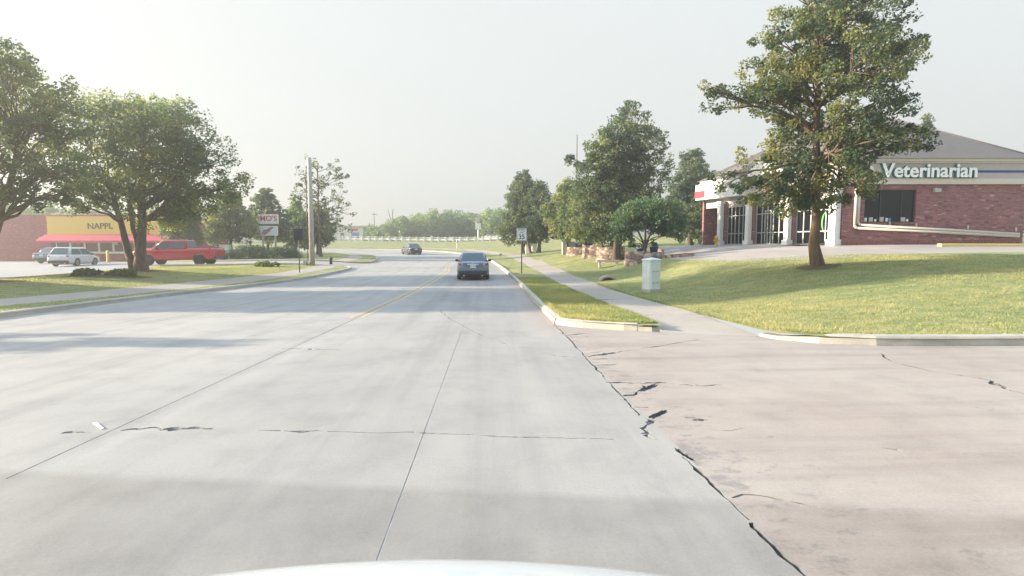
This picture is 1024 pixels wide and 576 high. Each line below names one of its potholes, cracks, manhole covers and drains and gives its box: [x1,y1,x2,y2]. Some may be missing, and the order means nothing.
crack [880,353,1024,394]
crack [440,311,842,576]
crack [61,427,614,440]
